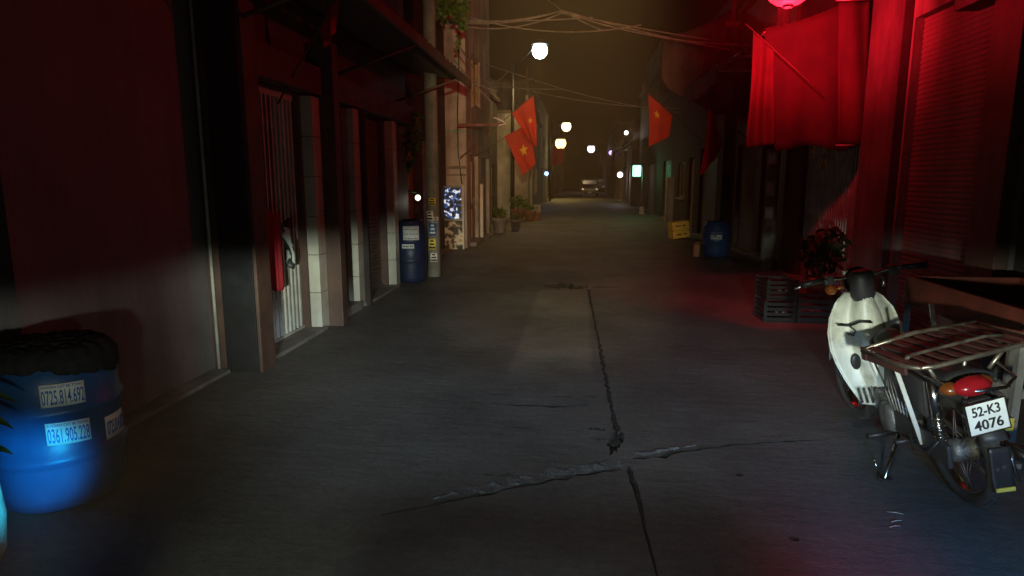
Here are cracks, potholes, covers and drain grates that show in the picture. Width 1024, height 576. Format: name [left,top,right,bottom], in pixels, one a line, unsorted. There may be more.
crack [379,420,836,516]
crack [469,394,598,408]
